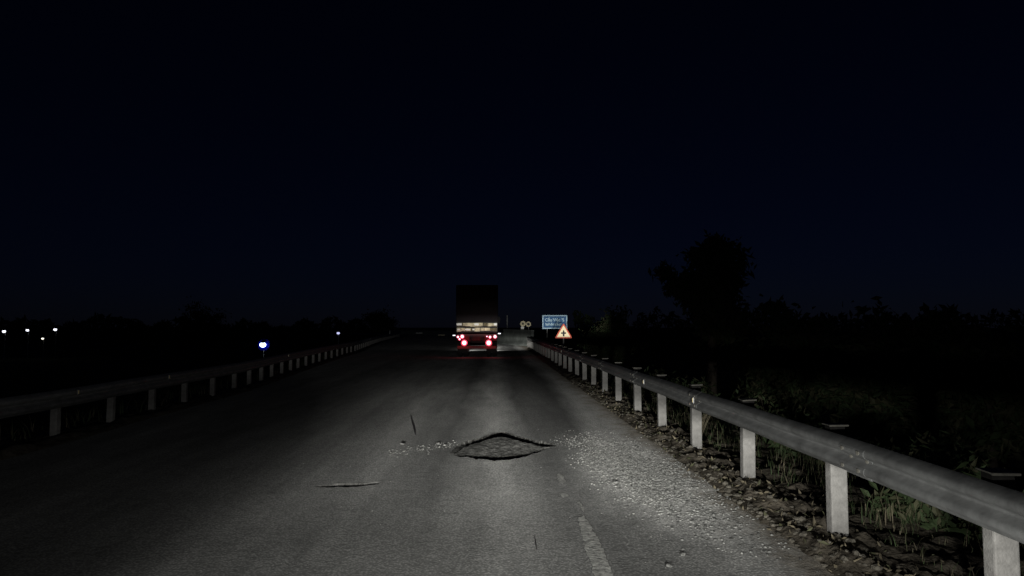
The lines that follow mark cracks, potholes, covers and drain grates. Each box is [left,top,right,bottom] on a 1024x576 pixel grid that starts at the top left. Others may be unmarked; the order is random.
pothole [450,432,558,461]
